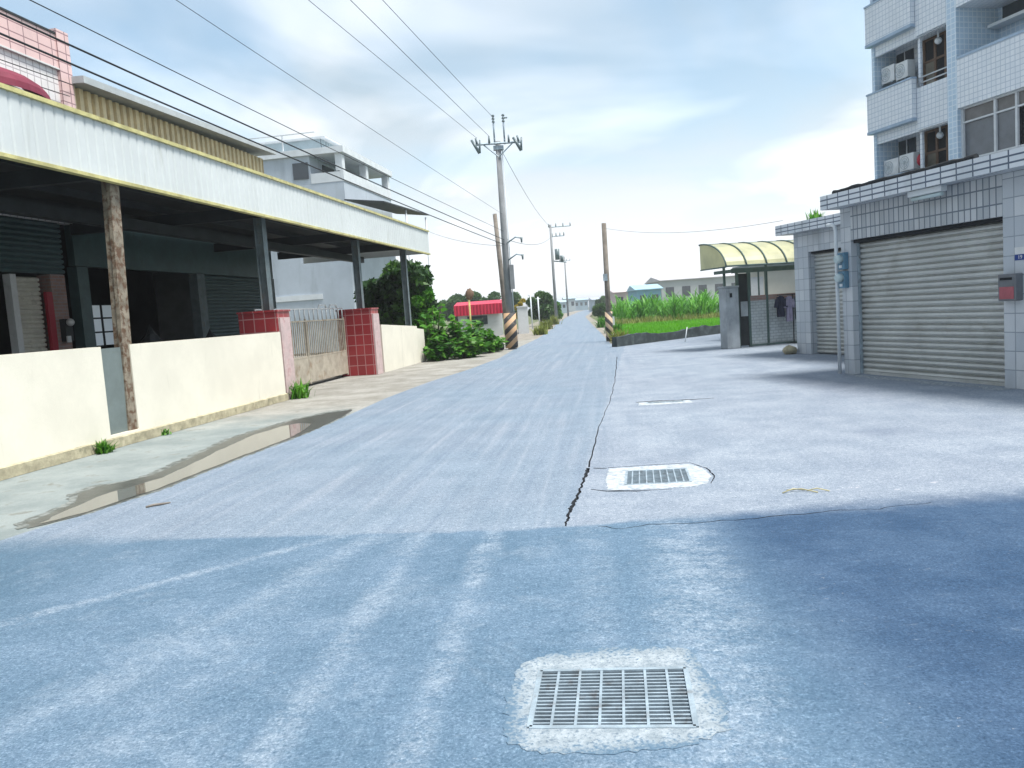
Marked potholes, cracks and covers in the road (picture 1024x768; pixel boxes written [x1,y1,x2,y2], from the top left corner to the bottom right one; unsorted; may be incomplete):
crack [564,359,931,529]
